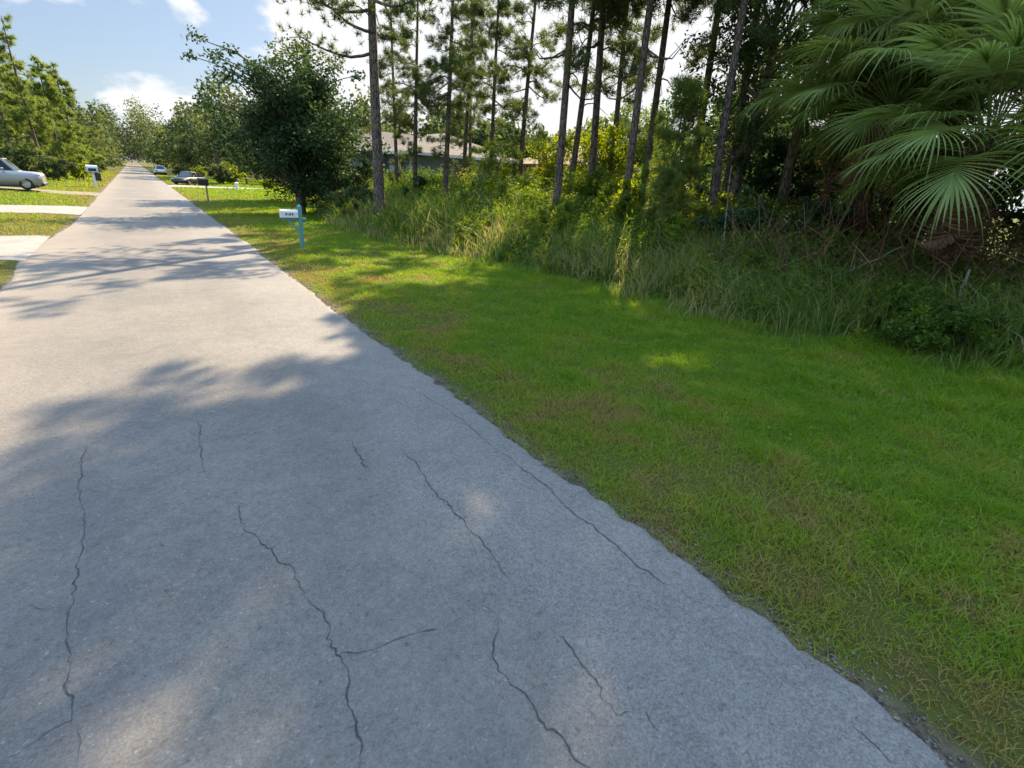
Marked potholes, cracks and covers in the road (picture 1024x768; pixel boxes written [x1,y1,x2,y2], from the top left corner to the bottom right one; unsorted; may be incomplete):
crack [12,447,101,762]
crack [238,501,435,768]
crack [405,382,668,585]
crack [488,612,627,768]
